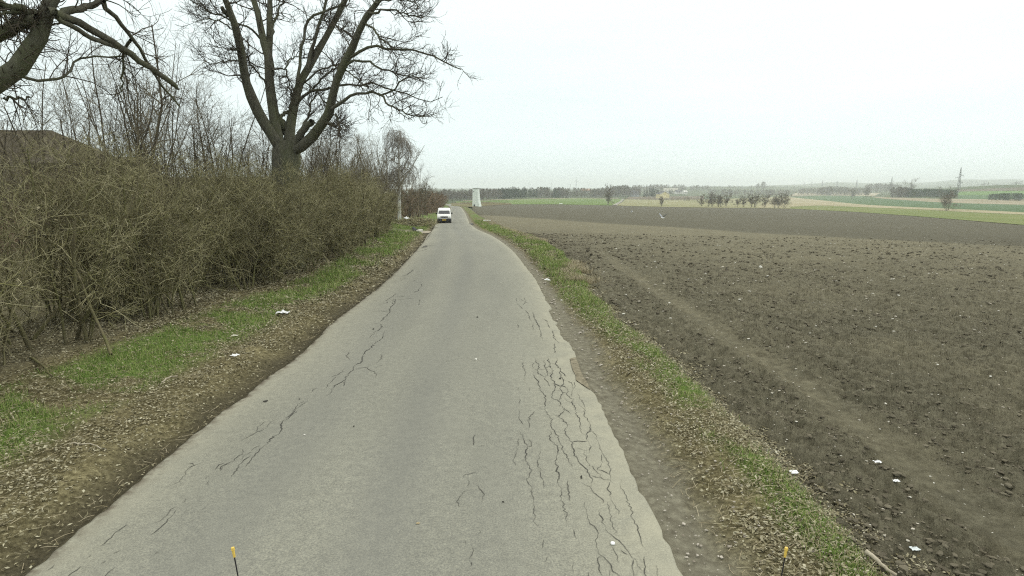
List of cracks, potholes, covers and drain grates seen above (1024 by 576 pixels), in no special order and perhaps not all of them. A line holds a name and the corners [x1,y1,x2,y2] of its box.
crack [514,299,658,576]
crack [152,271,422,534]
